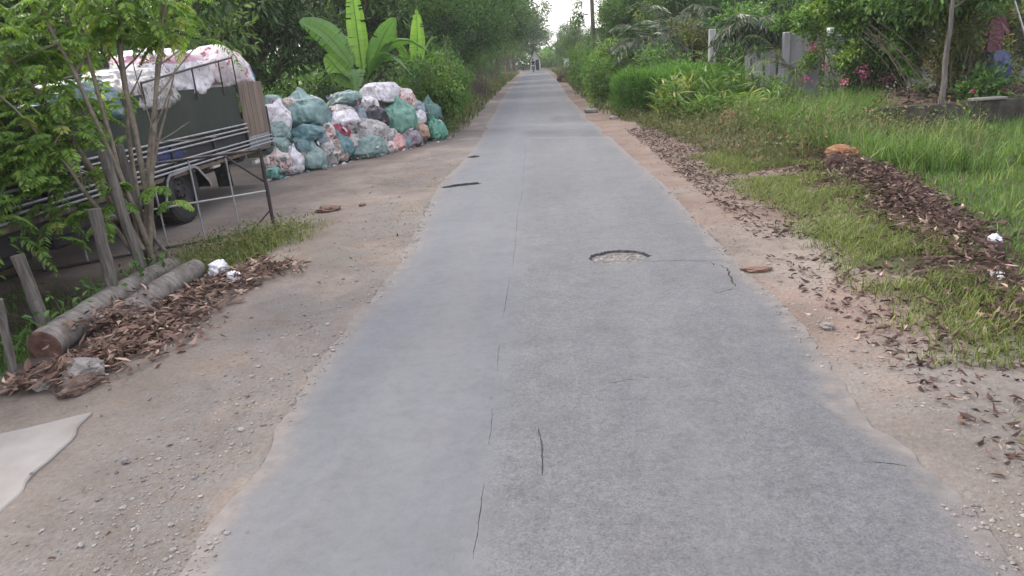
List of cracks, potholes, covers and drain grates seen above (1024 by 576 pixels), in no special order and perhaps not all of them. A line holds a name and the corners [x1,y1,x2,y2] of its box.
crack [473,153,526,554]
crack [644,260,736,293]
pothole [589,250,652,264]
